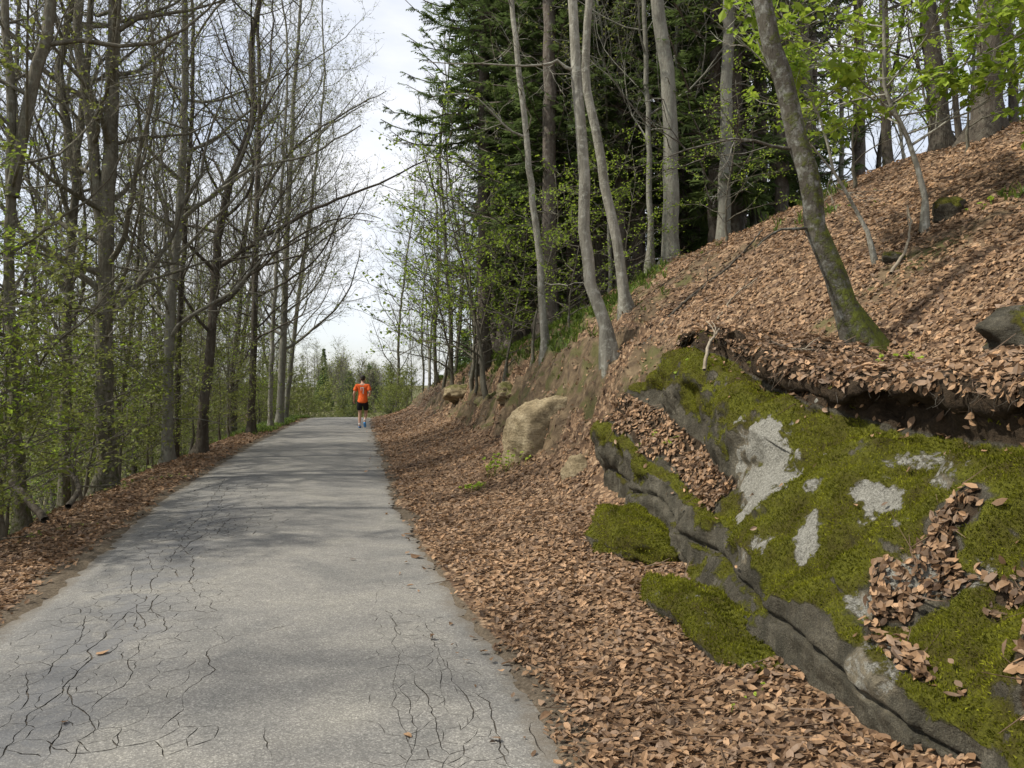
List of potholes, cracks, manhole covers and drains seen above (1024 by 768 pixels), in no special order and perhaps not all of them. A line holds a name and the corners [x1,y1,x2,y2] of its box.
crack [363,609,509,768]
